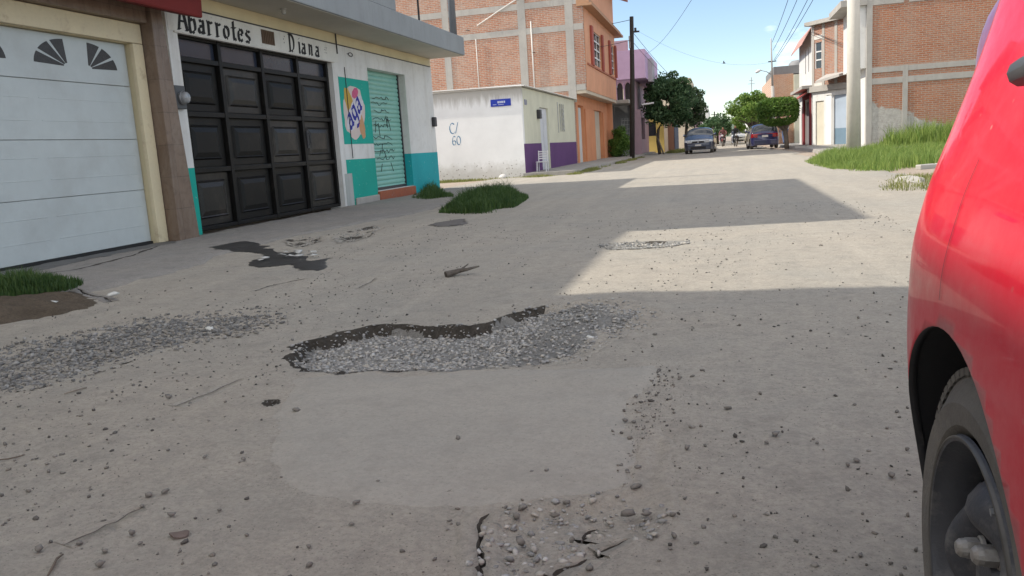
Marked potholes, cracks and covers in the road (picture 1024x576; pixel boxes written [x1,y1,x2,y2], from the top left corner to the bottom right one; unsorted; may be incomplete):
pothole [282,236,322,247]
pothole [0,306,294,395]
pothole [330,225,382,243]
crack [536,524,644,576]
crack [452,509,507,576]
pothole [282,297,666,375]
pothole [599,240,690,250]
